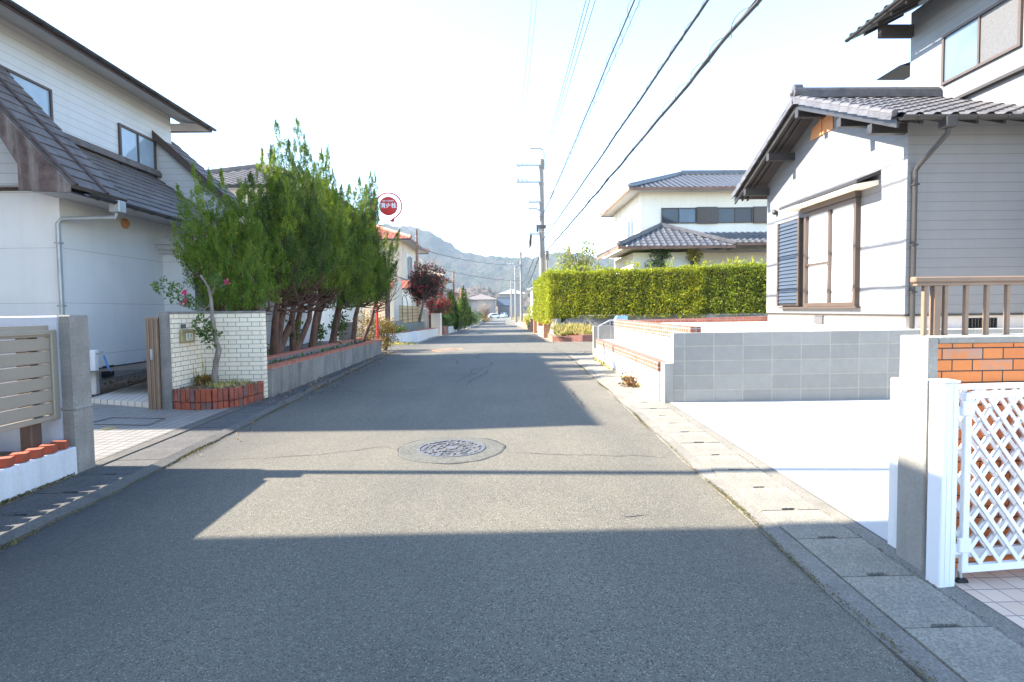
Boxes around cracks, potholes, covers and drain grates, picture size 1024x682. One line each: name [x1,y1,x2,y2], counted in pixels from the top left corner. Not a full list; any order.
manhole cover [398,437,506,464]
